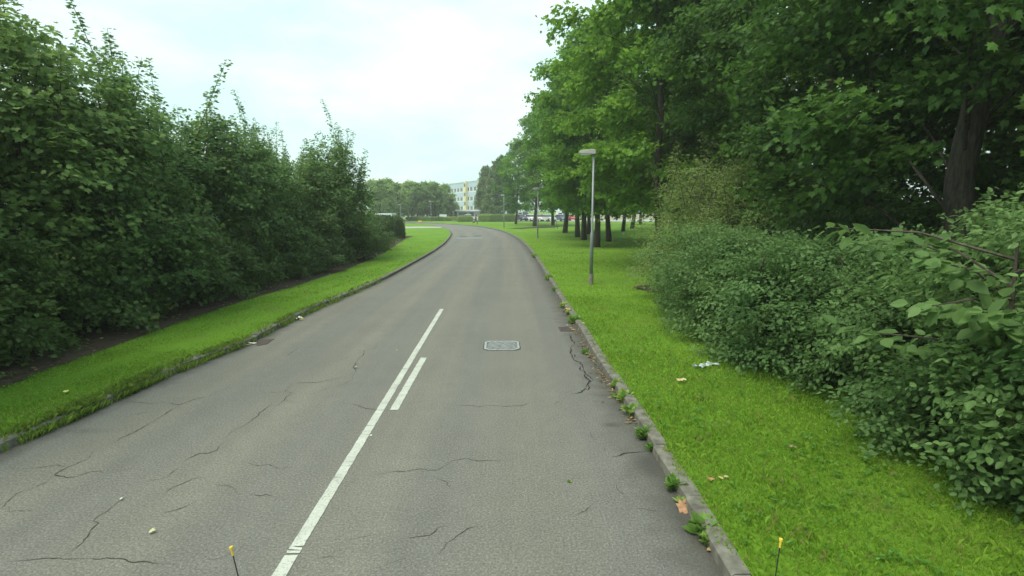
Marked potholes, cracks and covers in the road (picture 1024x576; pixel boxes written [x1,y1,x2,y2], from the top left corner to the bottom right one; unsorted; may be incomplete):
crack [569,335,605,396]
manhole cover [483,341,521,351]
crack [8,493,172,564]
crack [2,397,203,512]
crack [156,347,375,512]
